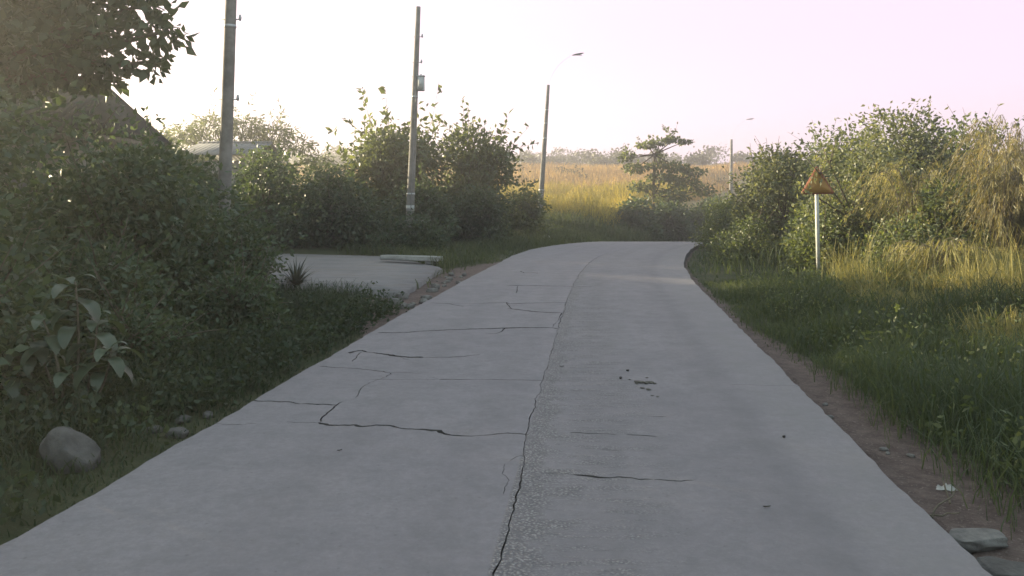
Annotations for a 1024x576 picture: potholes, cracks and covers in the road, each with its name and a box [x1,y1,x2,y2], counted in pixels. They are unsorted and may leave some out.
crack [552,473,688,482]
crack [254,250,616,576]
